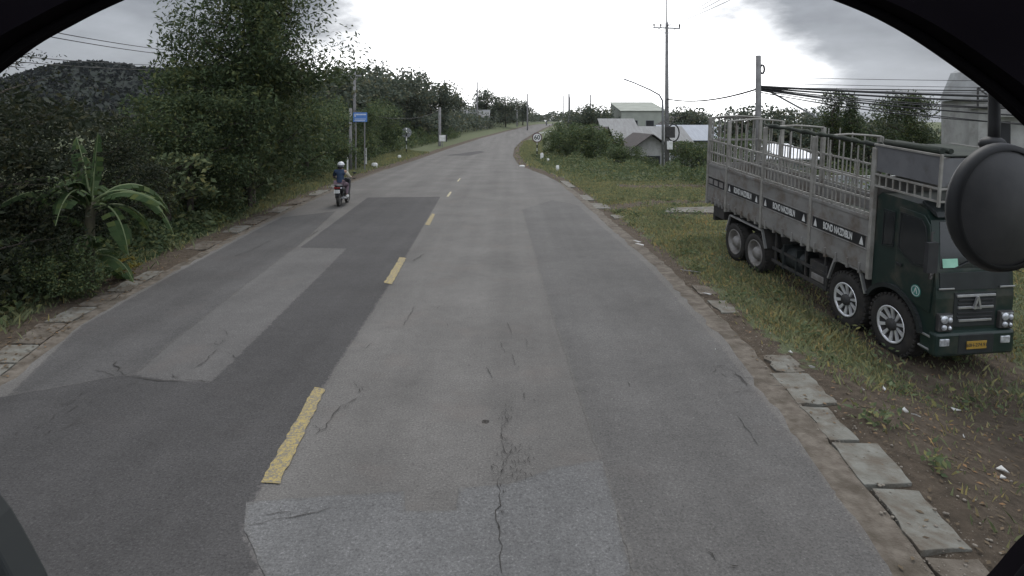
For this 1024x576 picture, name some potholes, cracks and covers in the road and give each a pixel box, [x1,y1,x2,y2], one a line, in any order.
crack [249,506,327,525]
crack [486,323,535,572]
